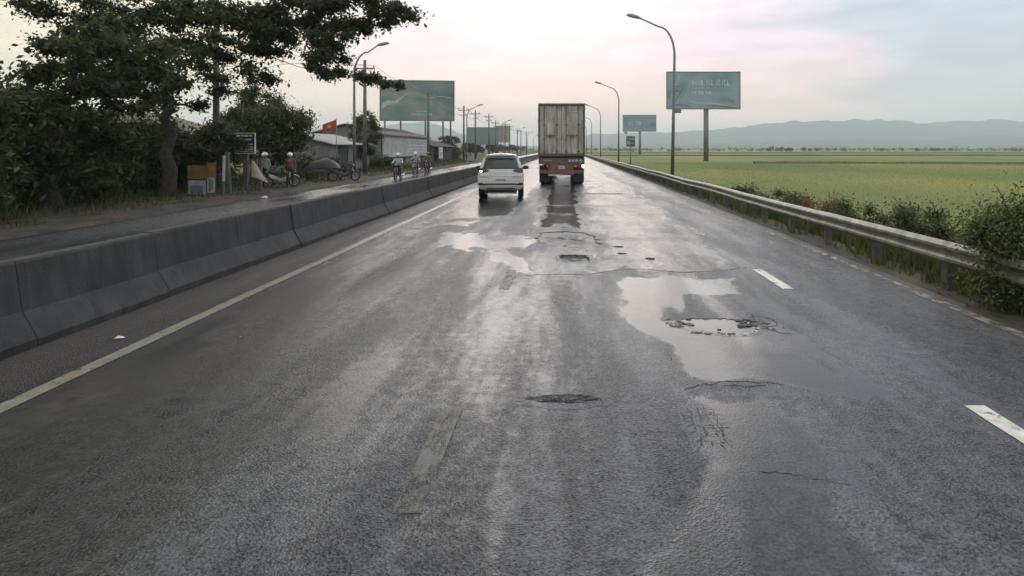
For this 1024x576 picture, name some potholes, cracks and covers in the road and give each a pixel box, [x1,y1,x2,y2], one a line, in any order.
crack [685,380,783,389]
pothole [552,254,597,264]
crack [686,407,733,445]
crack [527,267,746,276]
pothole [666,313,785,337]
pothole [510,389,617,410]
